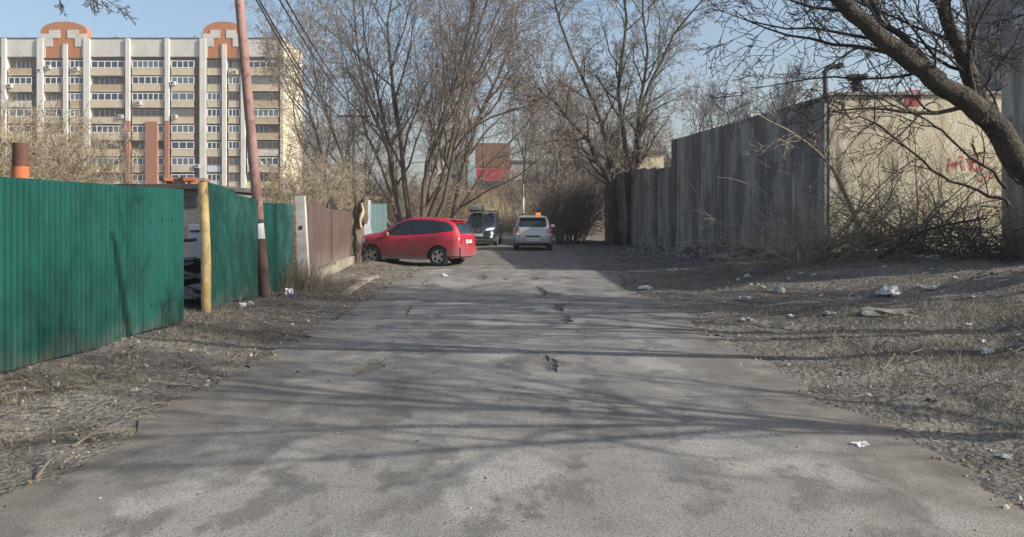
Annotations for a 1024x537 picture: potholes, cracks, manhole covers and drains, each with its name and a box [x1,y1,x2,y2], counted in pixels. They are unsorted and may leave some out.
pothole [537,354,558,372]
